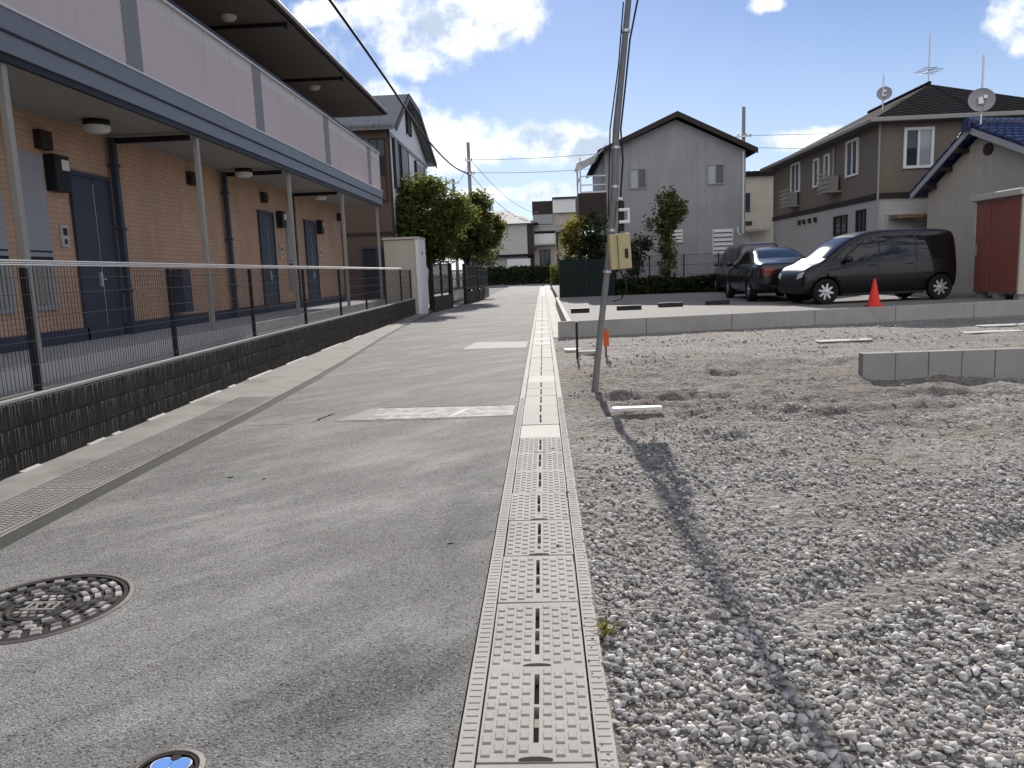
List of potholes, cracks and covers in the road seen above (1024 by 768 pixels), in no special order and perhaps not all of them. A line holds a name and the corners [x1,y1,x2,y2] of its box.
manhole cover [132,748,206,768]
manhole cover [0,573,135,645]
